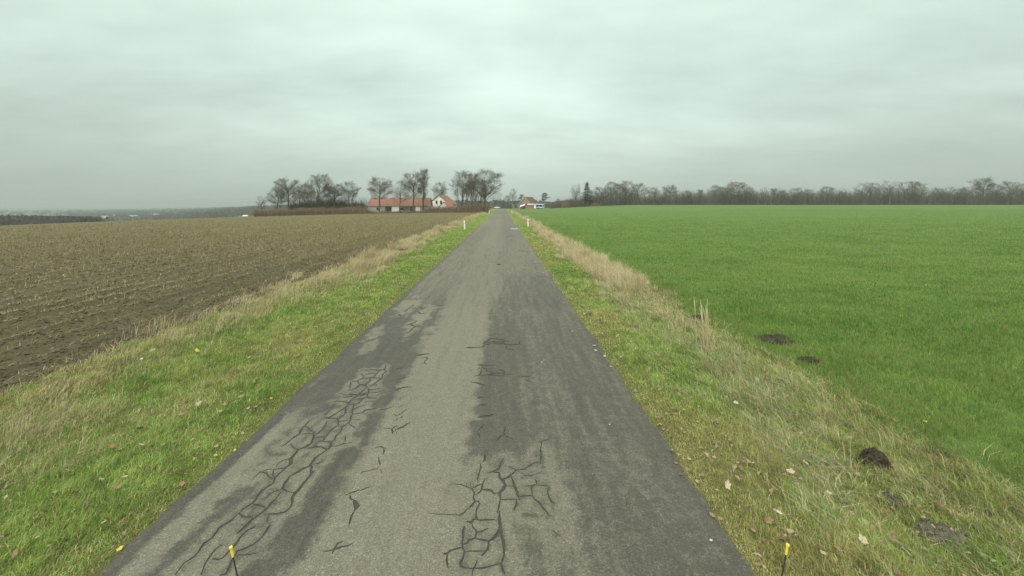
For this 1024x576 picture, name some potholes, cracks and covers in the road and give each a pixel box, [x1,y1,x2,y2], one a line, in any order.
crack [430,334,559,575]
crack [175,354,428,576]
crack [398,305,425,333]
